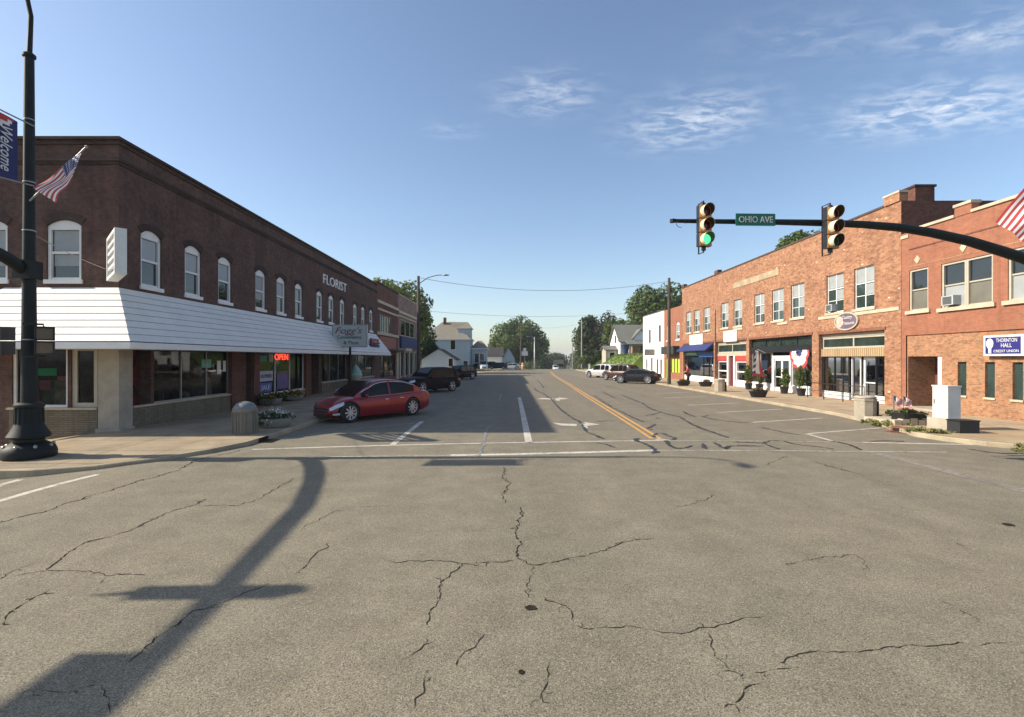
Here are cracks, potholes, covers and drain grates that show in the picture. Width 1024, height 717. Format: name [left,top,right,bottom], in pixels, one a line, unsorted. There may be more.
crack [390,467,1003,712]
crack [2,478,293,583]
crack [20,680,117,710]
crack [130,584,267,661]
